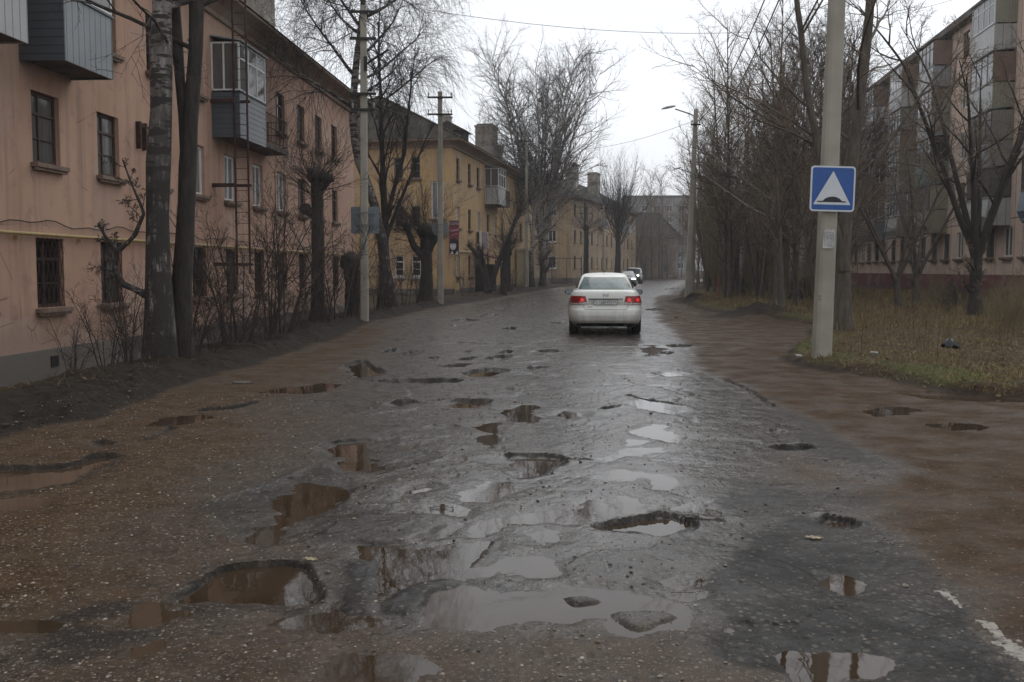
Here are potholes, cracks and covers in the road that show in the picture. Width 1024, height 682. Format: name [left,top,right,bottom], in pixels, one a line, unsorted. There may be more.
pothole [762,441,823,452]
pothole [572,509,709,538]
pothole [153,558,340,615]
pothole [338,357,392,379]
pothole [303,435,453,476]
pothole [429,397,498,409]
pothole [0,451,140,500]
pothole [469,450,575,480]
pothole [797,510,871,532]
pothole [184,461,402,550]
